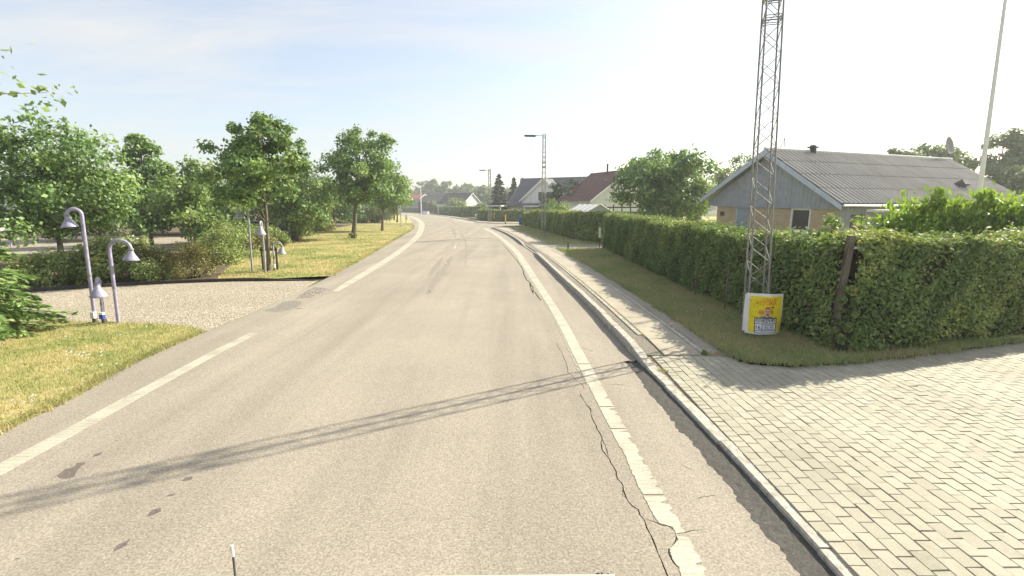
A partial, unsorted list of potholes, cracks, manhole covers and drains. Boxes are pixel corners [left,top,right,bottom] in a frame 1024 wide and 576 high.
crack [502,244,541,300]
crack [557,345,694,576]
